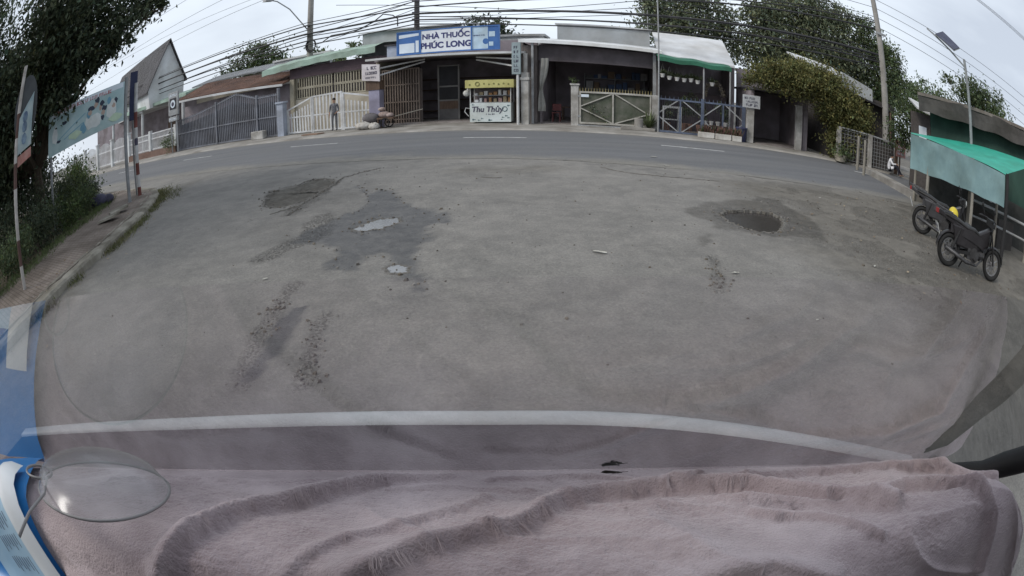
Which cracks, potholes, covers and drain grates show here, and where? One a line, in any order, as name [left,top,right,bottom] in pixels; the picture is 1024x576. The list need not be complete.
pothole [349,218,404,232]
pothole [381,264,412,275]
crack [271,168,380,215]
pothole [715,209,787,233]
